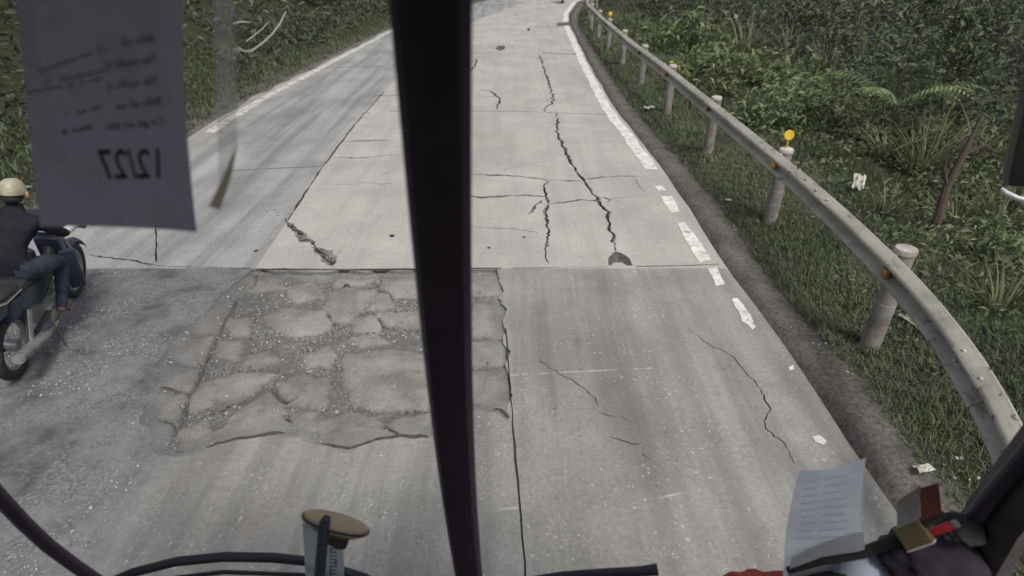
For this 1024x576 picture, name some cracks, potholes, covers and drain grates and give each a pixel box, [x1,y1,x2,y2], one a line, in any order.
crack [472,54,652,263]
crack [539,357,652,461]
pothole [608,252,632,266]
crack [688,329,795,464]
crack [285,218,338,267]
crack [315,140,398,186]
